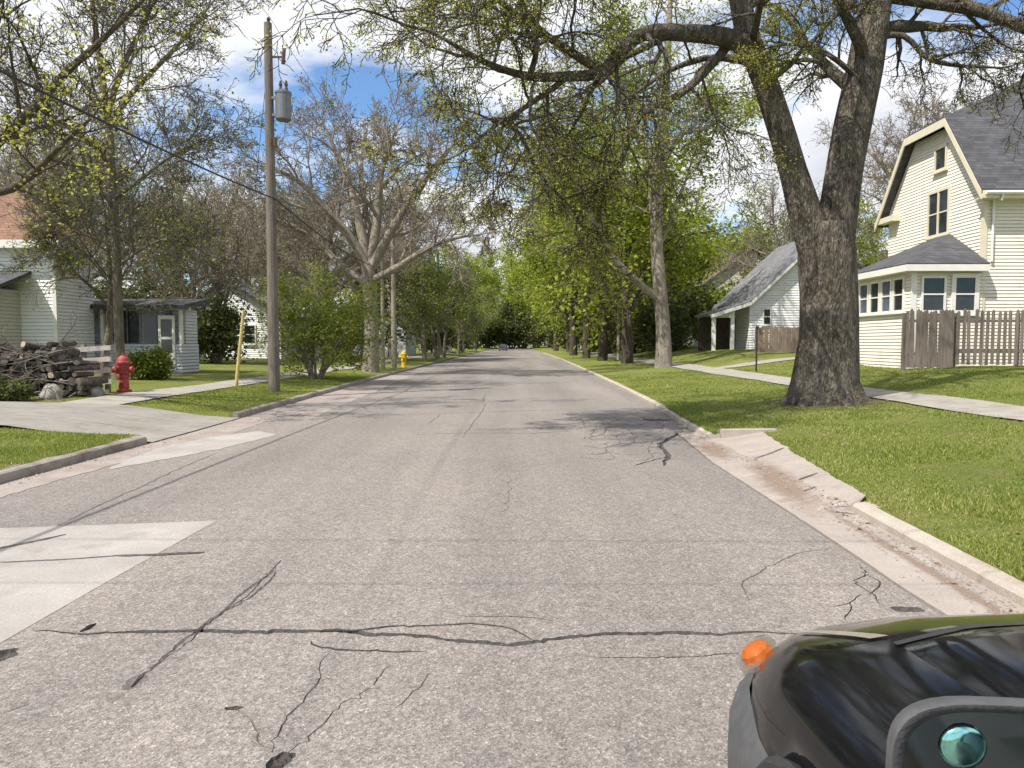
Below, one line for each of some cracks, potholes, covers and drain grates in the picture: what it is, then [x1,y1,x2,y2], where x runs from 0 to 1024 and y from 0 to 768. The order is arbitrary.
crack [836,564,883,620]
crack [0,534,798,758]
crack [416,395,570,437]
pothole [266,751,296,768]
crack [740,548,828,601]
crack [577,417,679,466]
